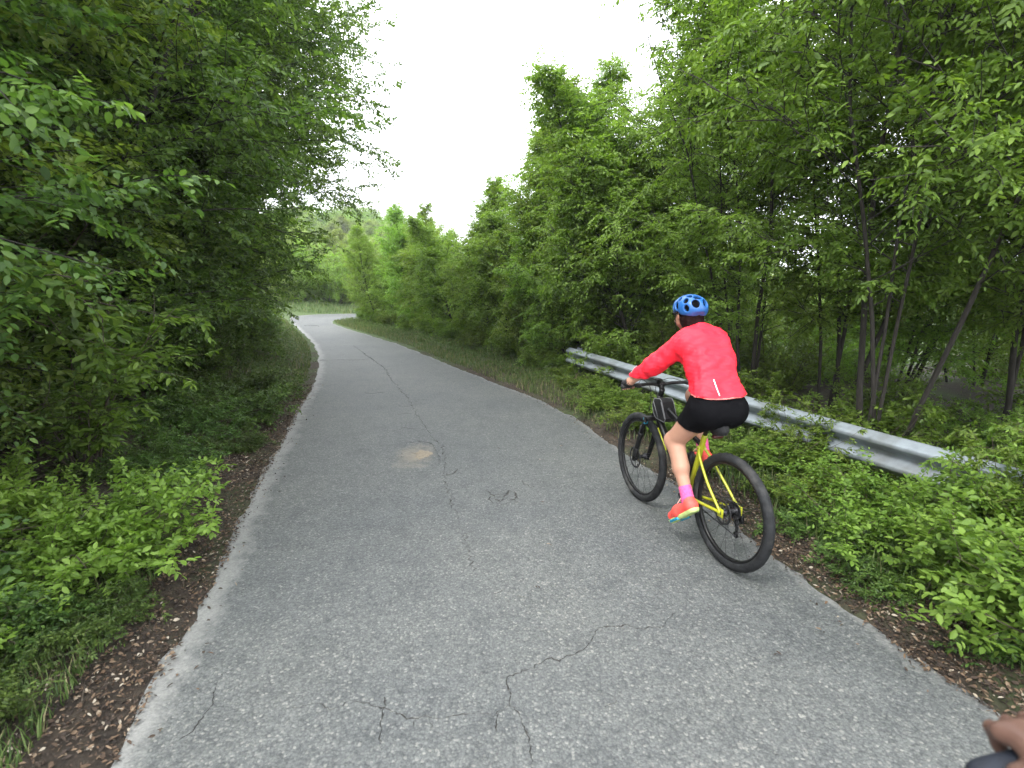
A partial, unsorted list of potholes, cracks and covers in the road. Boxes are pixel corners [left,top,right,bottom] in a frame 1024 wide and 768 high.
crack [485,482,534,505]
crack [292,611,677,768]
crack [354,345,476,570]
crack [173,676,222,744]
